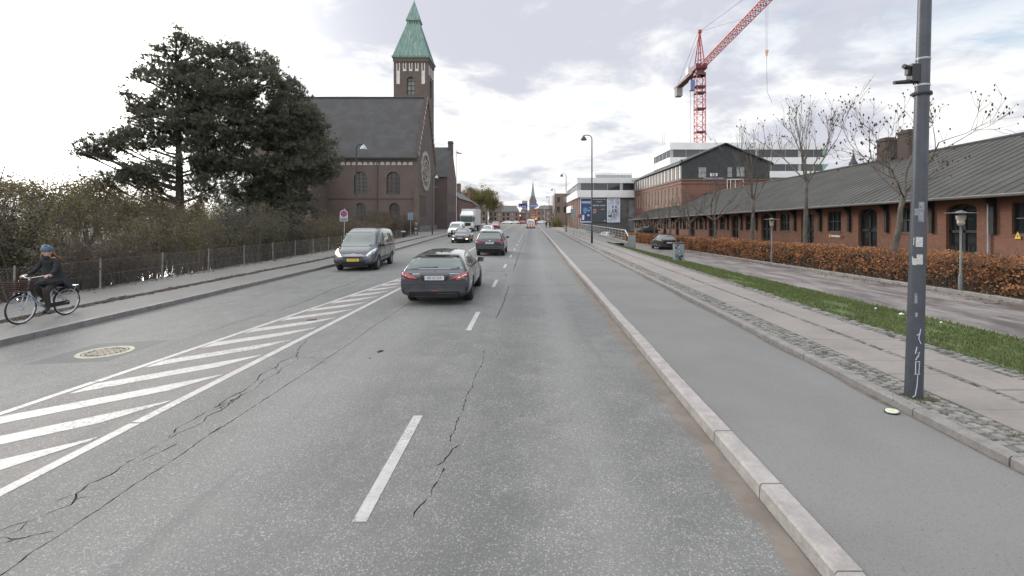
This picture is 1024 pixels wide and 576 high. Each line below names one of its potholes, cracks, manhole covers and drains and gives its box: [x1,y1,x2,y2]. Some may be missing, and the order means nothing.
crack [413,349,484,517]
manhole cover [74,346,135,359]
crack [0,340,327,543]
